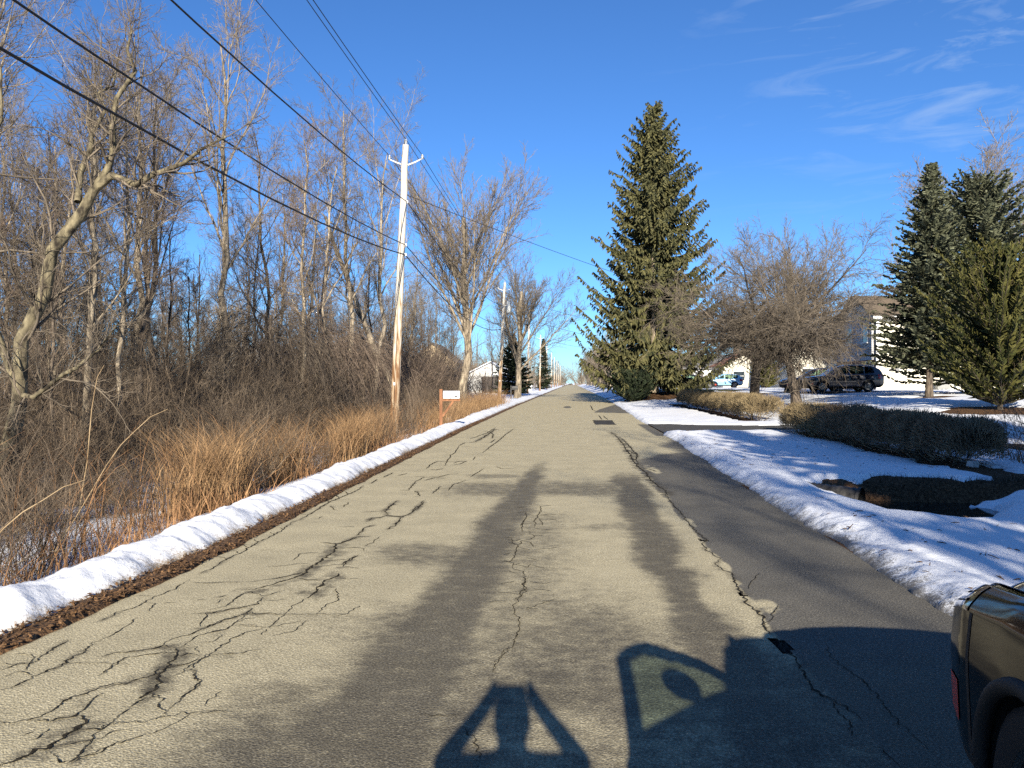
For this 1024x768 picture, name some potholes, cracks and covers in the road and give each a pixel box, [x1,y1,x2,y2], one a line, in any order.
crack [0,429,513,766]
crack [826,647,930,751]
crack [489,505,556,673]
pothole [767,638,794,654]
